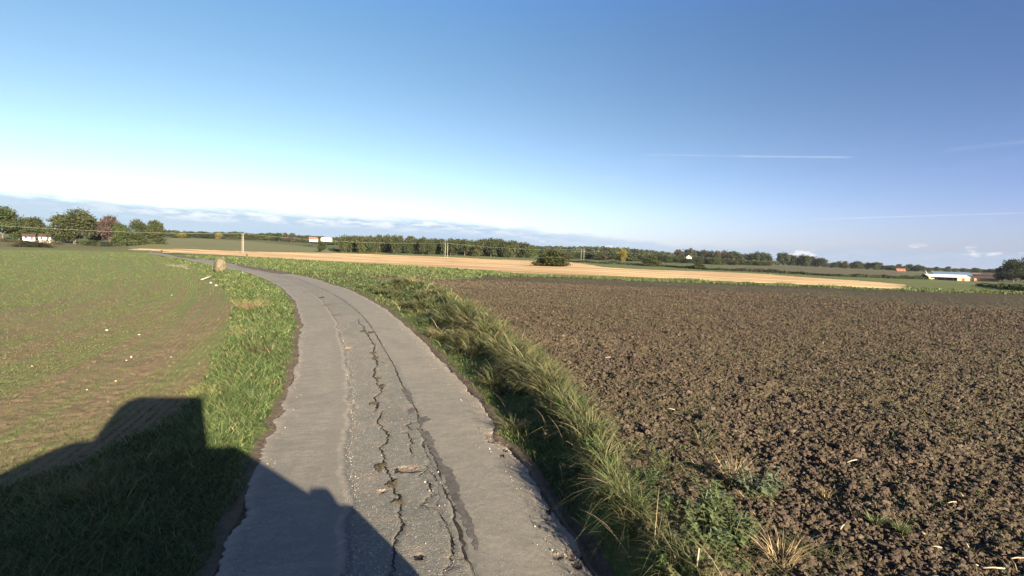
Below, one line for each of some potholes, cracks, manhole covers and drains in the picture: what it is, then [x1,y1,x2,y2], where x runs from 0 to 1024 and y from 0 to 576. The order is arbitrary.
crack [359,319,465,576]
